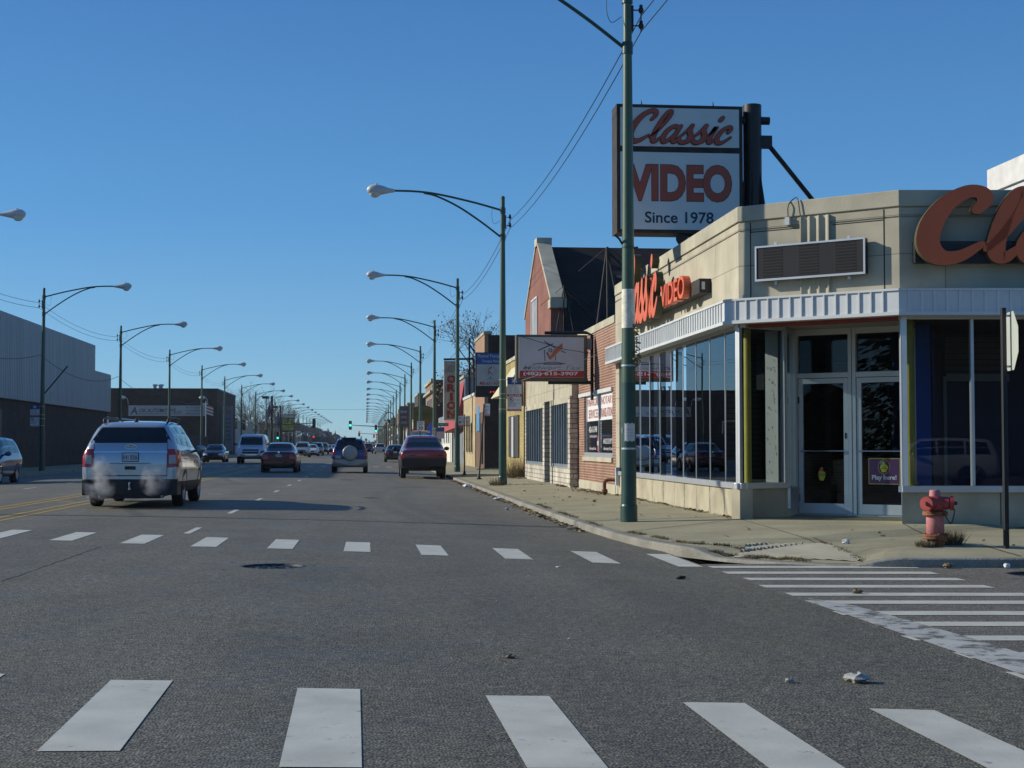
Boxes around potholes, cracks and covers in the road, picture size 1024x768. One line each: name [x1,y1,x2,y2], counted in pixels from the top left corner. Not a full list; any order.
manhole cover [224,562,319,570]
